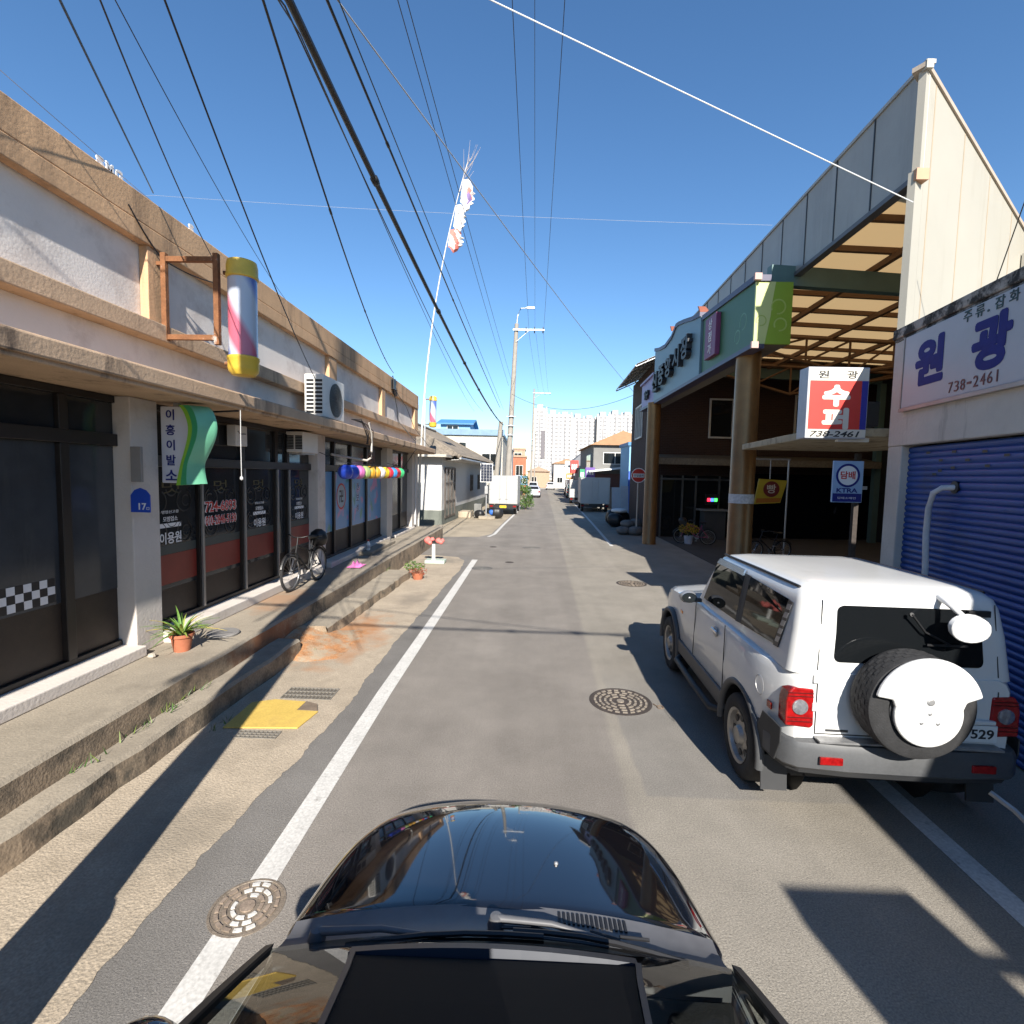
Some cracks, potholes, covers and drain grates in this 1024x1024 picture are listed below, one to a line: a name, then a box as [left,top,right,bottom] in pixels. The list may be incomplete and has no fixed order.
manhole cover [589,688,652,716]
drain grate [233,730,282,740]
manhole cover [206,878,286,938]
drain grate [280,687,340,700]
